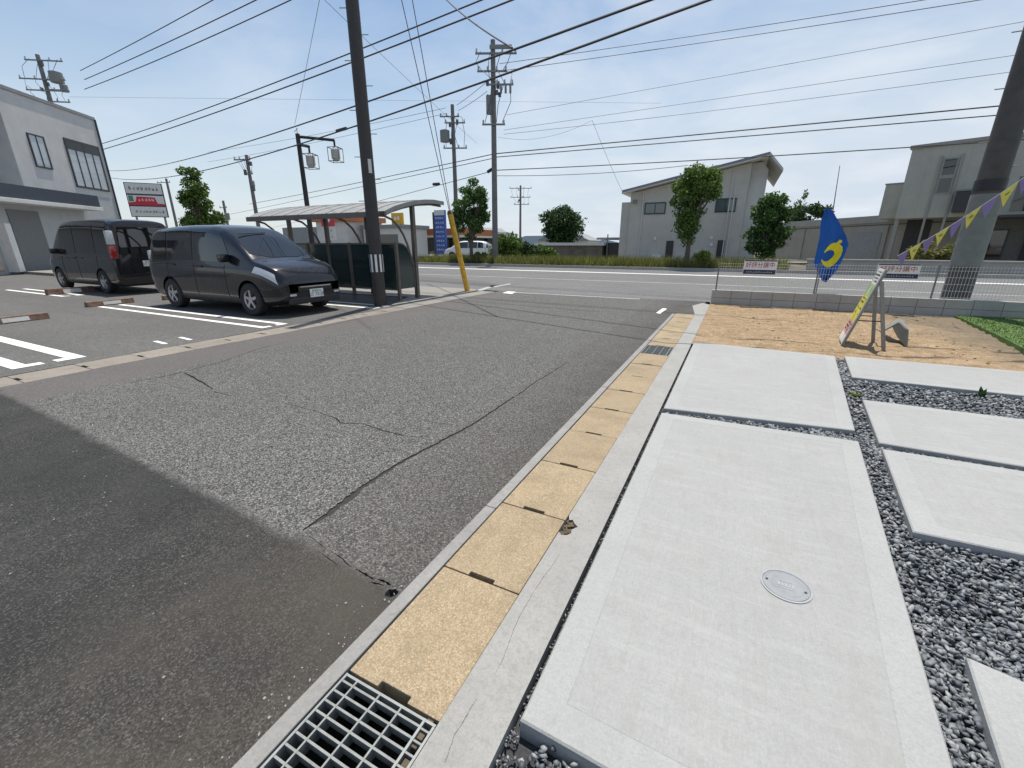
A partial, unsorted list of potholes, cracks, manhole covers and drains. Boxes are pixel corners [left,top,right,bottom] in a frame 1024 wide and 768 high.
crack [285,365,563,586]
drain grate [260,673,436,768]
manhole cover [760,569,813,604]
drain grate [640,345,674,356]
